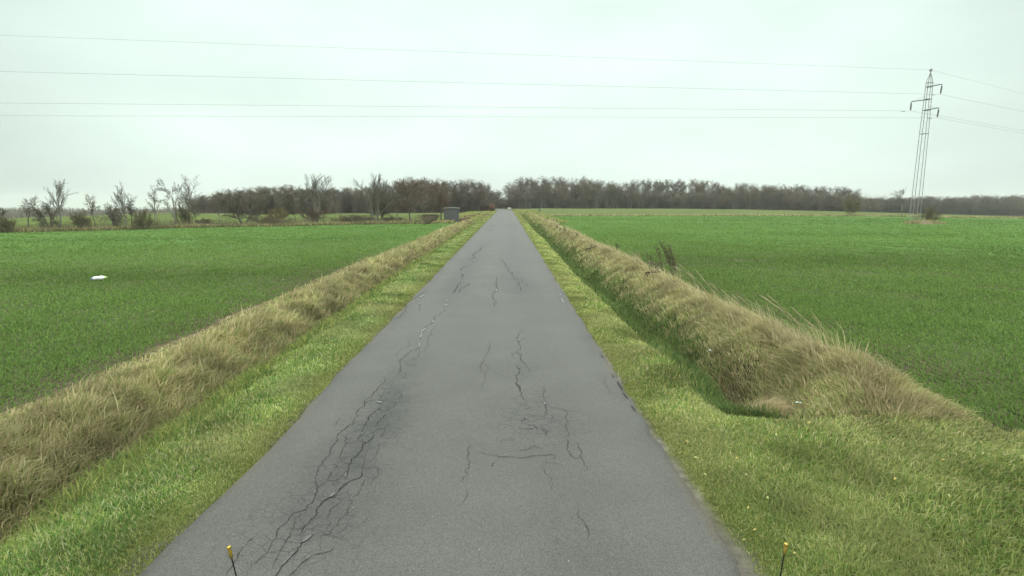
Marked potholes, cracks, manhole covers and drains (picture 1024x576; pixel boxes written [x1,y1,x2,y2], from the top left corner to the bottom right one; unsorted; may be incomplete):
crack [227,291,444,576]
crack [460,336,588,507]
